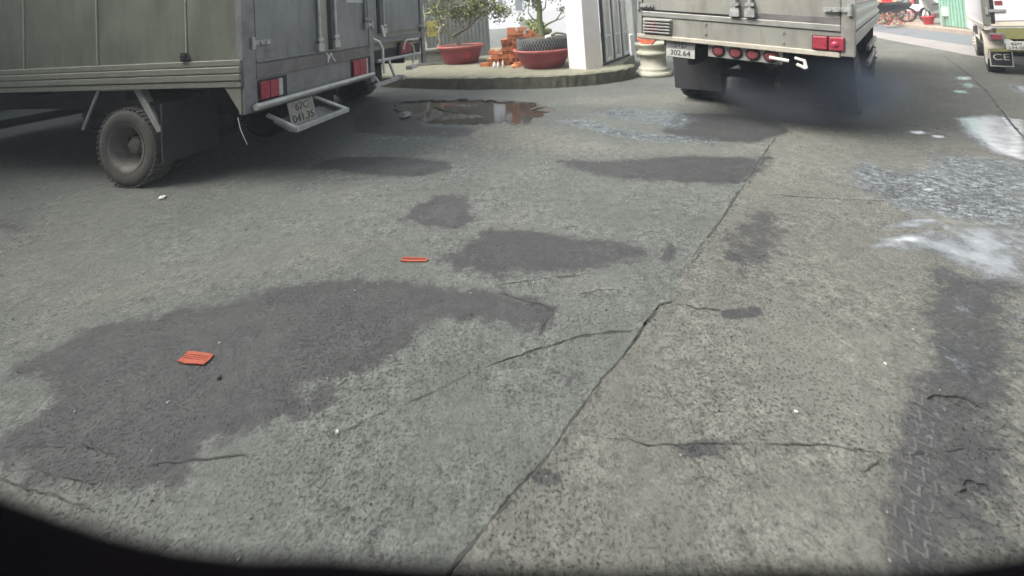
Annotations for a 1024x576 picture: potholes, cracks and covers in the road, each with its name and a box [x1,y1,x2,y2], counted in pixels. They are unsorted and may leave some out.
crack [587,428,1016,483]
pothole [384,98,559,127]
